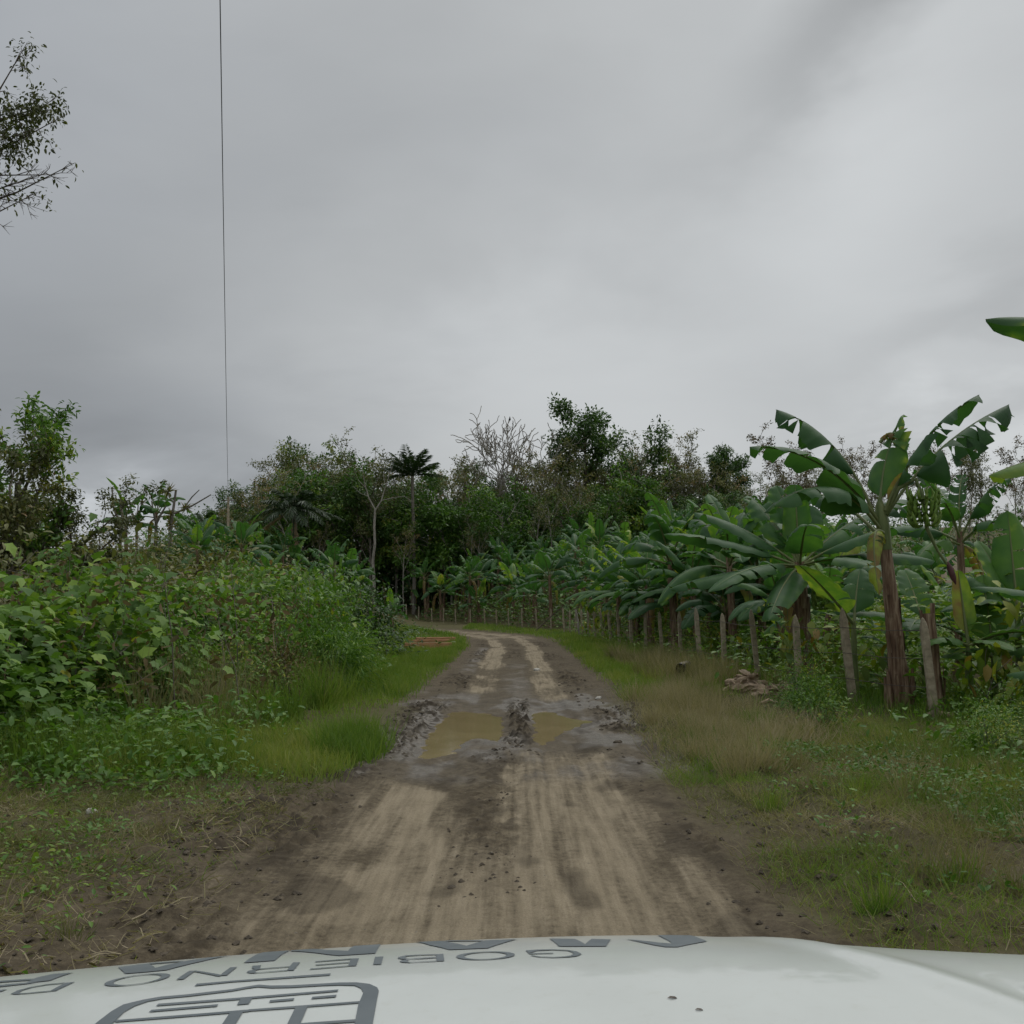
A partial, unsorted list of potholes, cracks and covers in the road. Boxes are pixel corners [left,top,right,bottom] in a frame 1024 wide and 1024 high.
pothole [394,704,520,764]
pothole [515,705,619,750]
